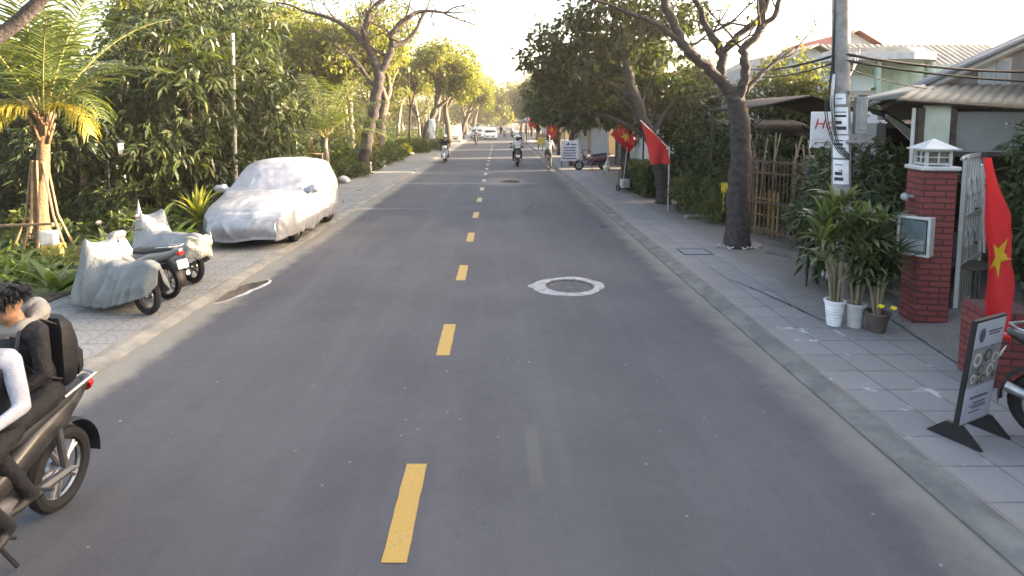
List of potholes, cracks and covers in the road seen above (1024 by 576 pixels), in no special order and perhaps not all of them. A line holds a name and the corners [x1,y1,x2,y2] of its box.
manhole cover [528,276,604,296]
